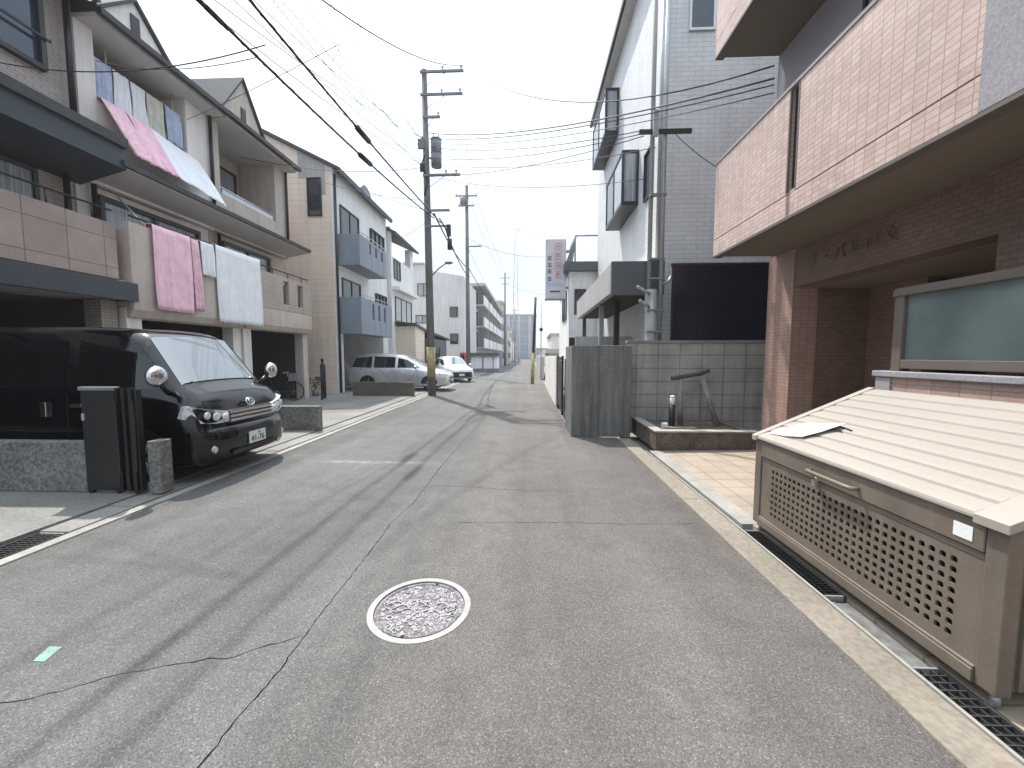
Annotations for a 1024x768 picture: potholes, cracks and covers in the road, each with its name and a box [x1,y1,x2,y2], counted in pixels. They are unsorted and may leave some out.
drain grate [911,666,1024,759]
drain grate [744,530,846,602]
manhole cover [366,578,471,644]
crack [0,434,470,768]
drain grate [0,532,67,559]
